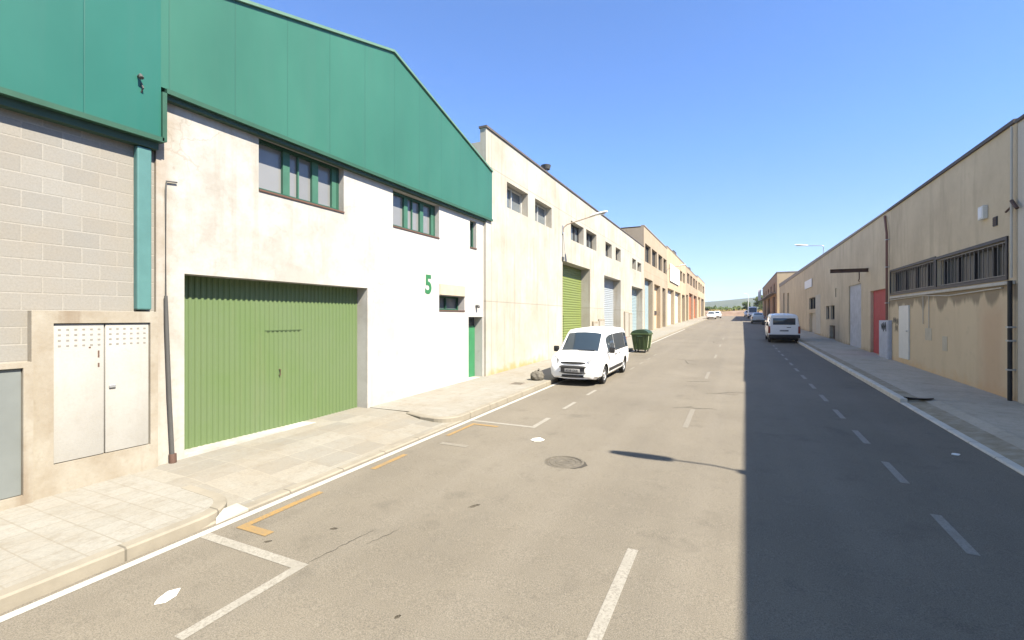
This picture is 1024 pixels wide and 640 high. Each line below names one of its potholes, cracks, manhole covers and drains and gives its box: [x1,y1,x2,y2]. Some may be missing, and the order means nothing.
manhole cover [544,456,588,469]
